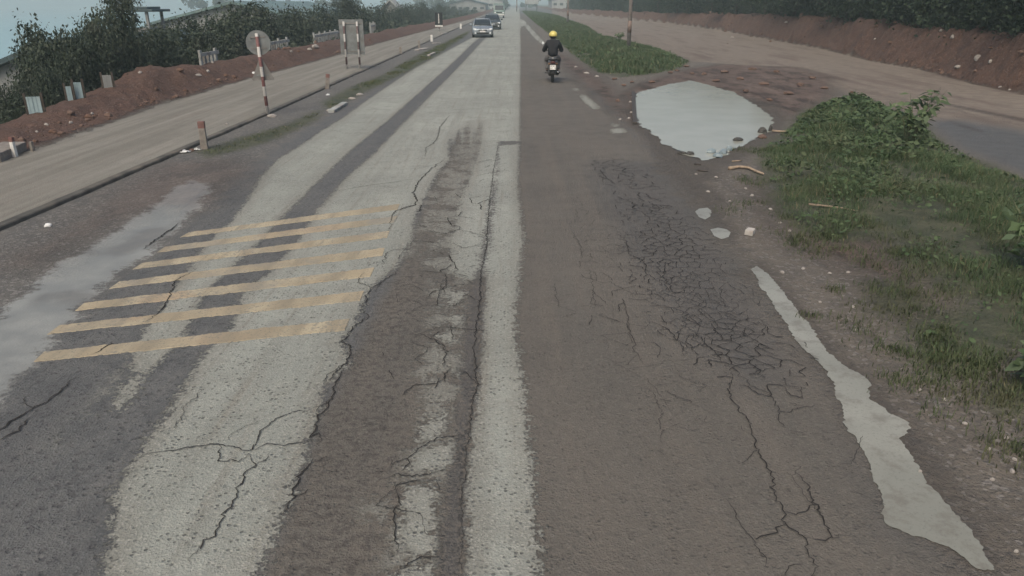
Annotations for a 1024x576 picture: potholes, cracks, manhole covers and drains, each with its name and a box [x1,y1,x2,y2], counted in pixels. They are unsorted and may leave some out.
crack [132,119,500,569]
crack [547,158,884,575]
crack [0,378,74,439]
